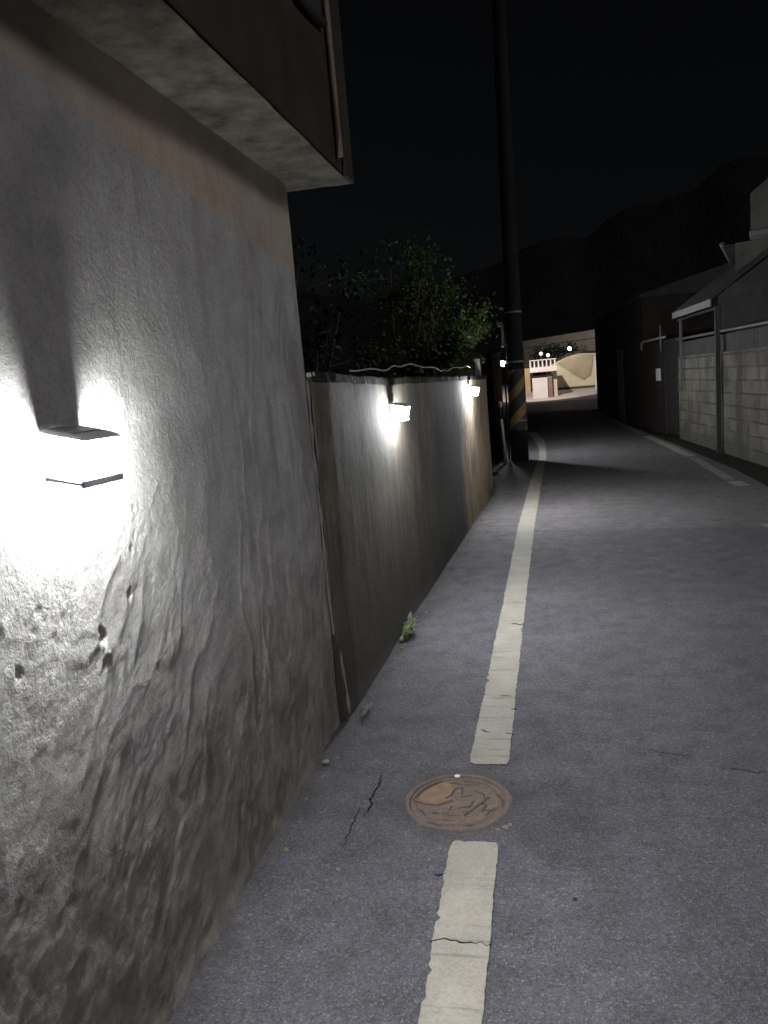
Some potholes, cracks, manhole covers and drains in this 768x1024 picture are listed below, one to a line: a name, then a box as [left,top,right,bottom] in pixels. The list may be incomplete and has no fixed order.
crack [430,938,492,946]
manhole cover [406,774,512,830]
crack [345,775,382,843]
